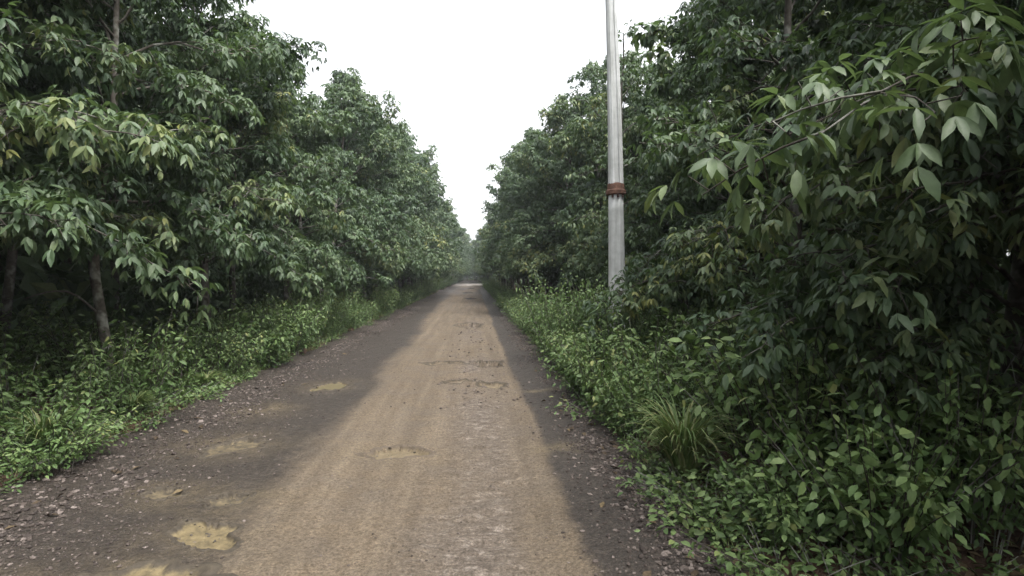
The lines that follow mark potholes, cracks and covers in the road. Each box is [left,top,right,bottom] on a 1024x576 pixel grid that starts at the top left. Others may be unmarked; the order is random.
pothole [76,558,238,576]
pothole [354,444,438,462]
pothole [195,491,257,509]
pothole [161,517,245,554]
pothole [475,380,509,389]
pothole [305,380,354,393]
pothole [196,436,271,460]
pothole [136,486,190,501]
pothole [464,360,505,368]
